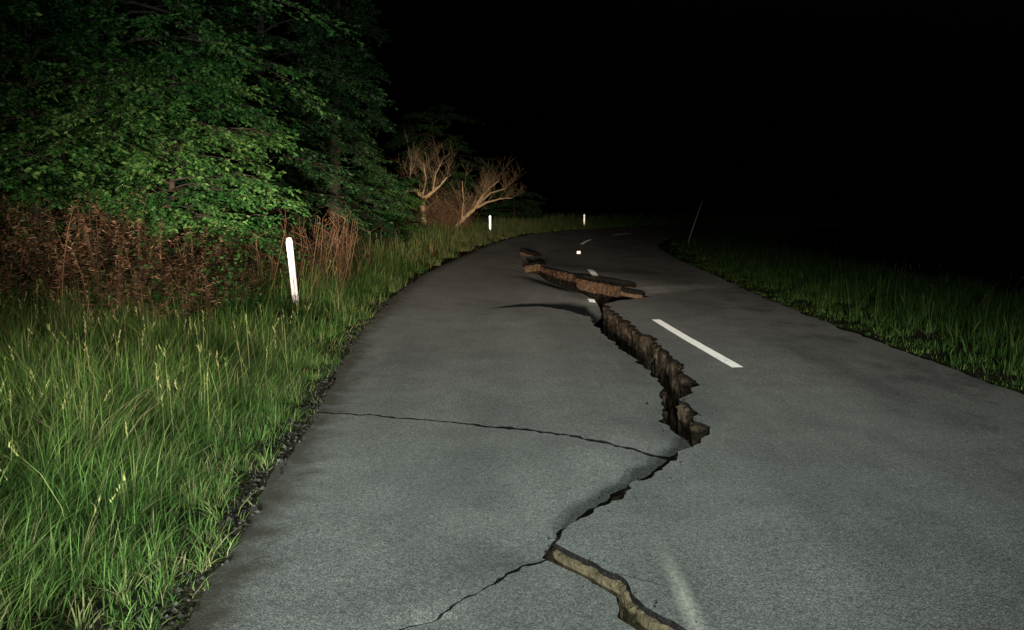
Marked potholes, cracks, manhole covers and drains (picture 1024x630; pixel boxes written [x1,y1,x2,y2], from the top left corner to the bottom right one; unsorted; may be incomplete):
crack [317,256,710,630]
